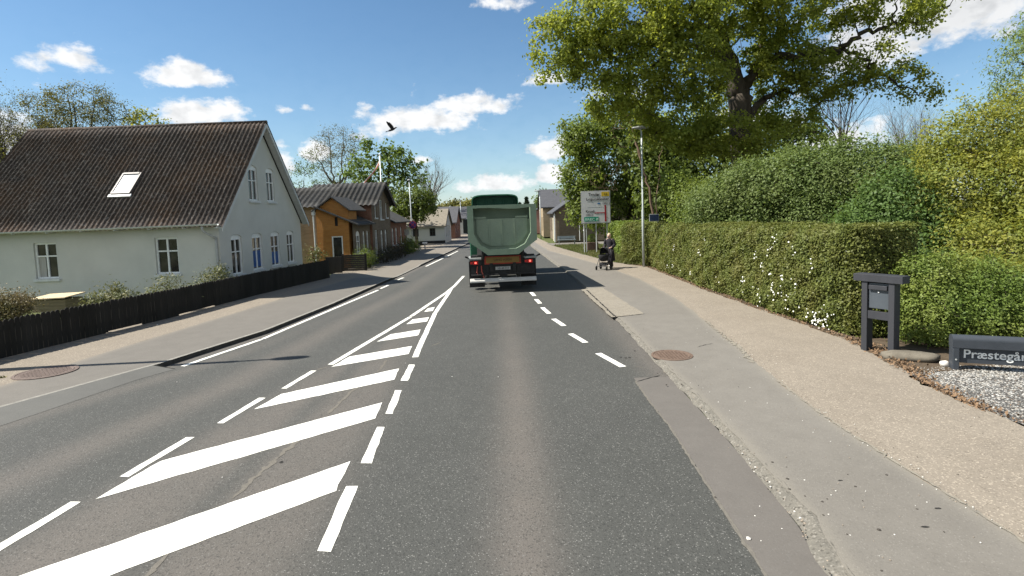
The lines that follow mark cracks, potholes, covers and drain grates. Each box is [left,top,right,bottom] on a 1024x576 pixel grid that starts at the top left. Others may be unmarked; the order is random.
crack [328,387,358,414]
manhole cover [11,365,79,380]
manhole cover [651,350,693,361]
crack [232,440,300,498]
